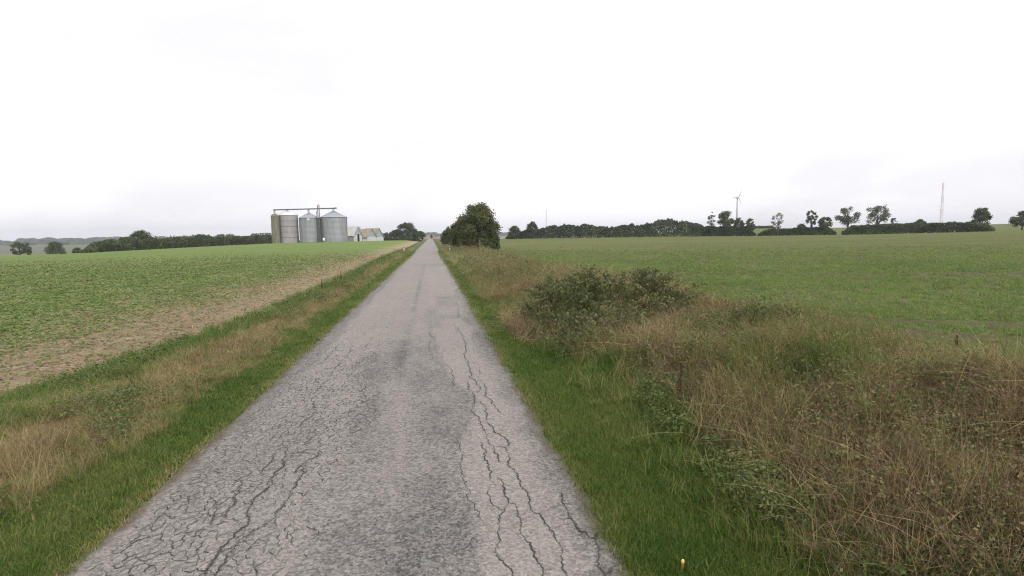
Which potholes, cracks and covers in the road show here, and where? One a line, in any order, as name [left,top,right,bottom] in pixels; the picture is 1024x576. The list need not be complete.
crack [428,301,614,576]
